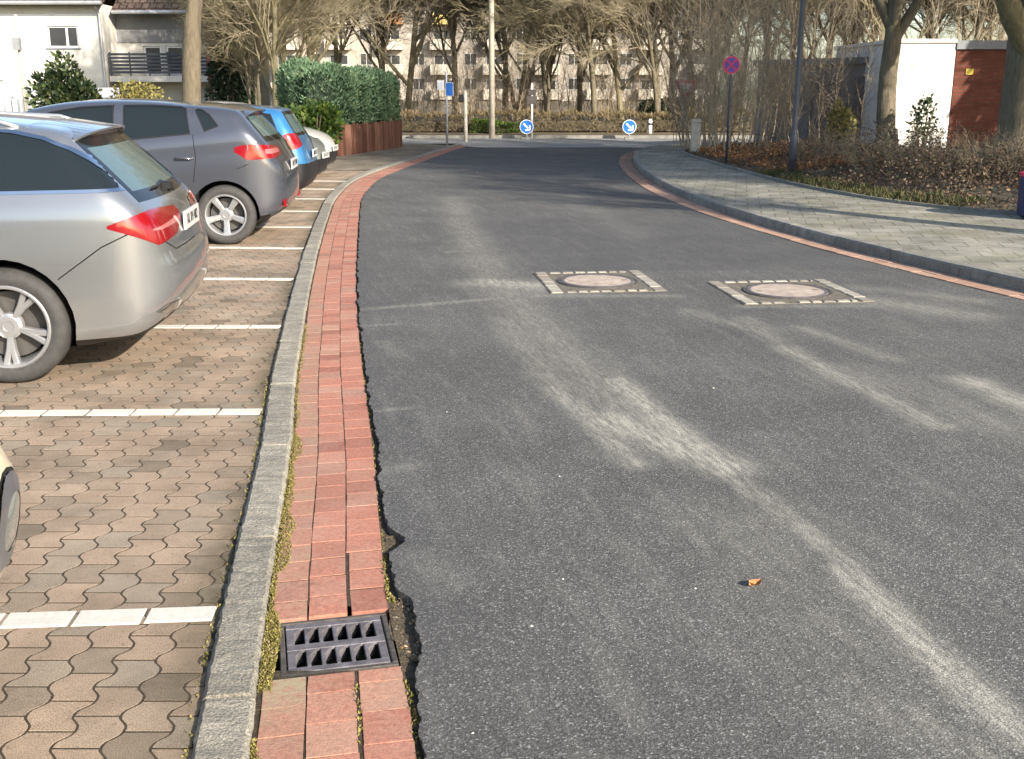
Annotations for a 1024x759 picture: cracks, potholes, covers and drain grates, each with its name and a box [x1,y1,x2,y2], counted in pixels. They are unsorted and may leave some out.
drain grate [279,612,399,677]
manhole cover [707,279,876,305]
pothole [389,598,421,663]
manhole cover [534,270,668,294]
